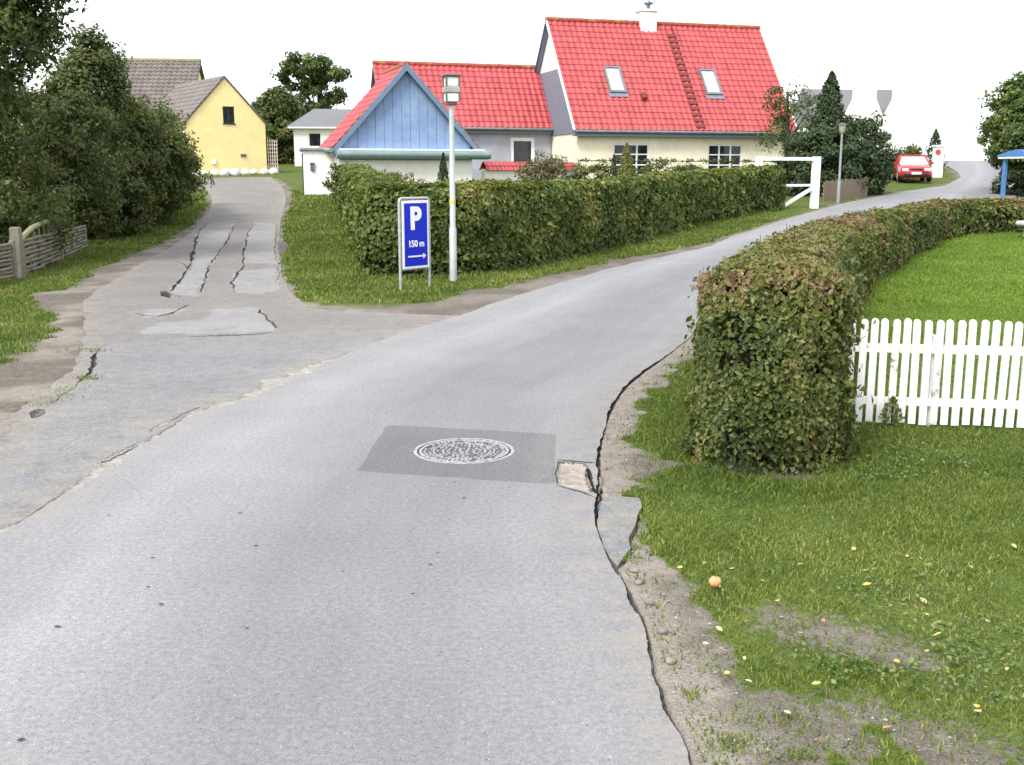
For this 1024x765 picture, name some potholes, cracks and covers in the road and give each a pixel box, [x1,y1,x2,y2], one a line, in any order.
manhole cover [413,438,515,464]
crack [258,309,277,329]
pothole [29,409,46,418]
pothole [555,461,593,492]
crack [556,352,691,765]
crack [136,222,253,316]
